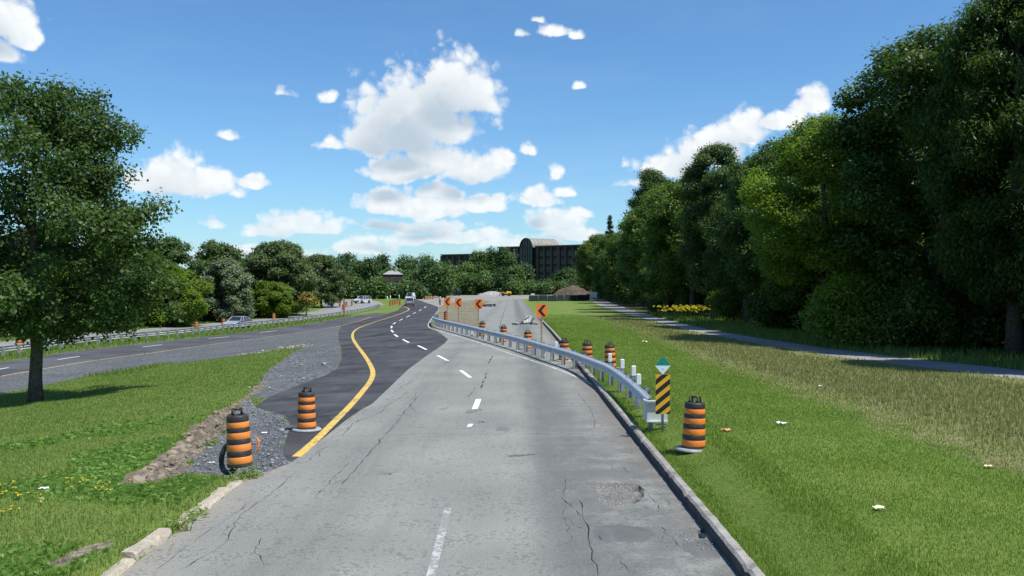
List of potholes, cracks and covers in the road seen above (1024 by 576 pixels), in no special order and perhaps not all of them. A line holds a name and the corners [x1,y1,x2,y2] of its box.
crack [563,480,628,573]
pothole [593,483,644,506]
crack [310,378,446,494]
